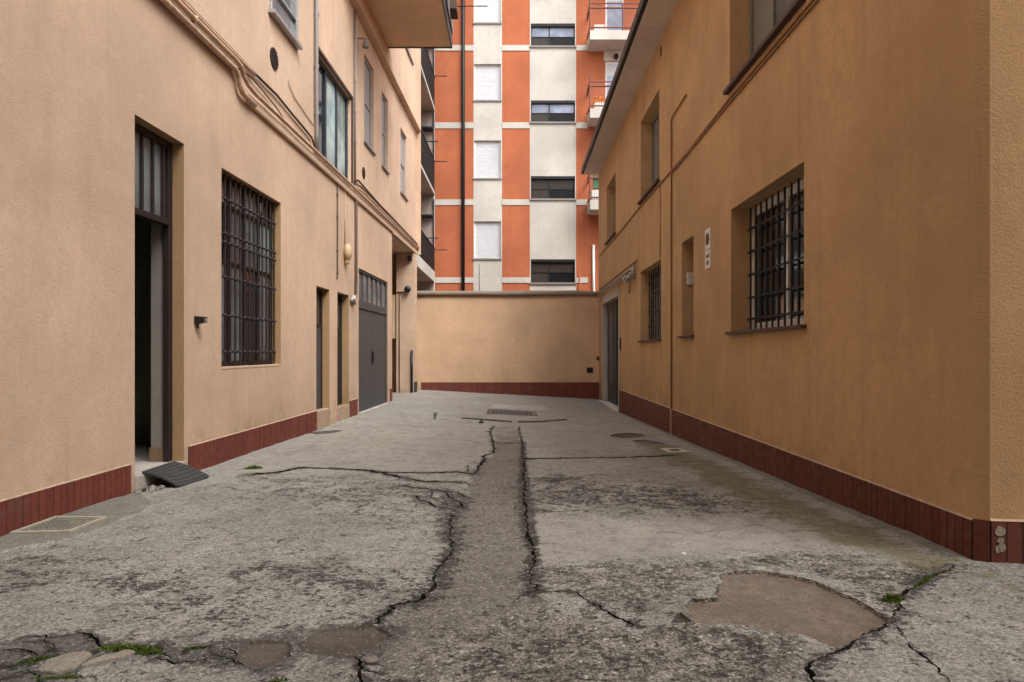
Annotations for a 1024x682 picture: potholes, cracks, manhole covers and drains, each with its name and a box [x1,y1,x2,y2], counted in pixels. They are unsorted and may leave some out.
crack [251,426,662,627]
crack [804,565,955,682]
crack [354,657,374,682]
crack [145,646,256,671]
crack [0,632,101,682]
